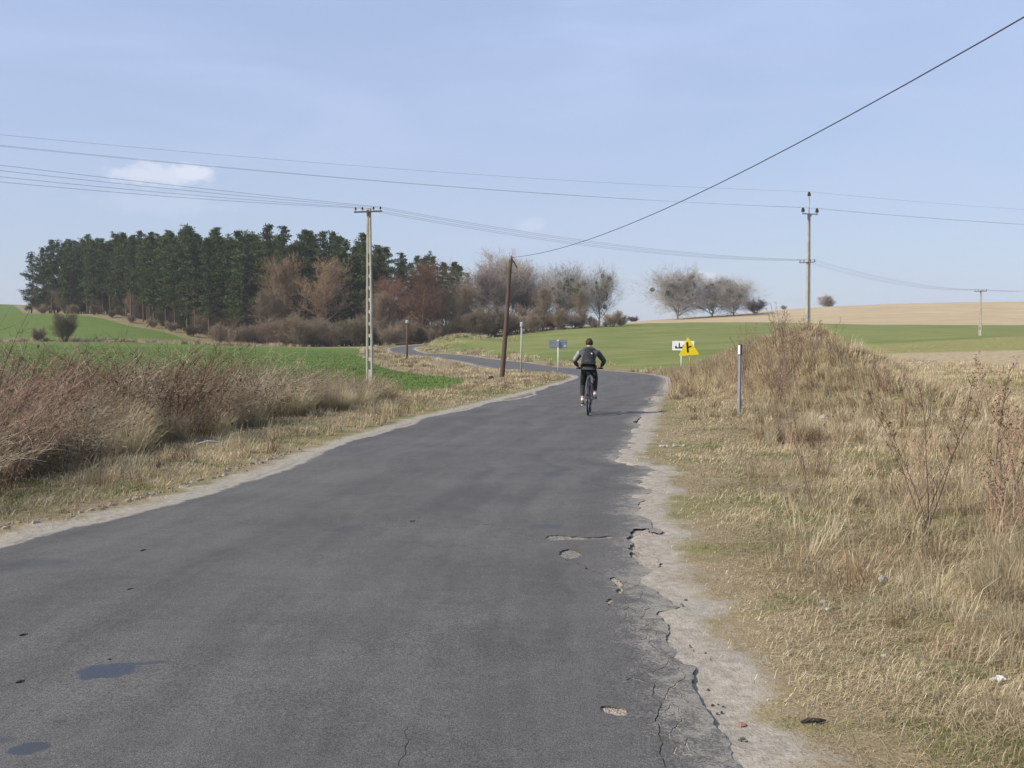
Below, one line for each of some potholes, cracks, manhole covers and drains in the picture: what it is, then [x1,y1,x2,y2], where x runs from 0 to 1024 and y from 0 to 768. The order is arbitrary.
pothole [600,706,628,716]
pothole [559,549,583,559]
crack [625,583,719,767]
pothole [610,577,626,594]
pothole [626,528,663,567]
